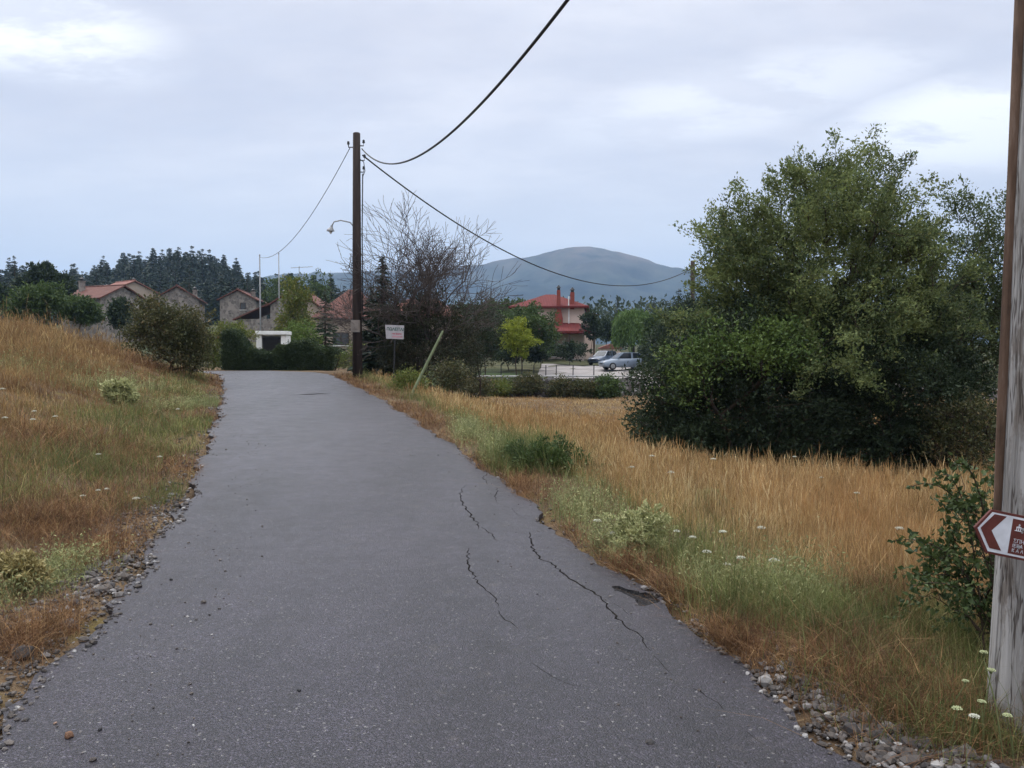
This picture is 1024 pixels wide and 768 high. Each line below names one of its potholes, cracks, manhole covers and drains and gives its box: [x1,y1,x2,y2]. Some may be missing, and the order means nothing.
crack [466,550,517,628]
crack [459,486,496,540]
crack [529,533,668,671]
pothole [612,586,660,606]
